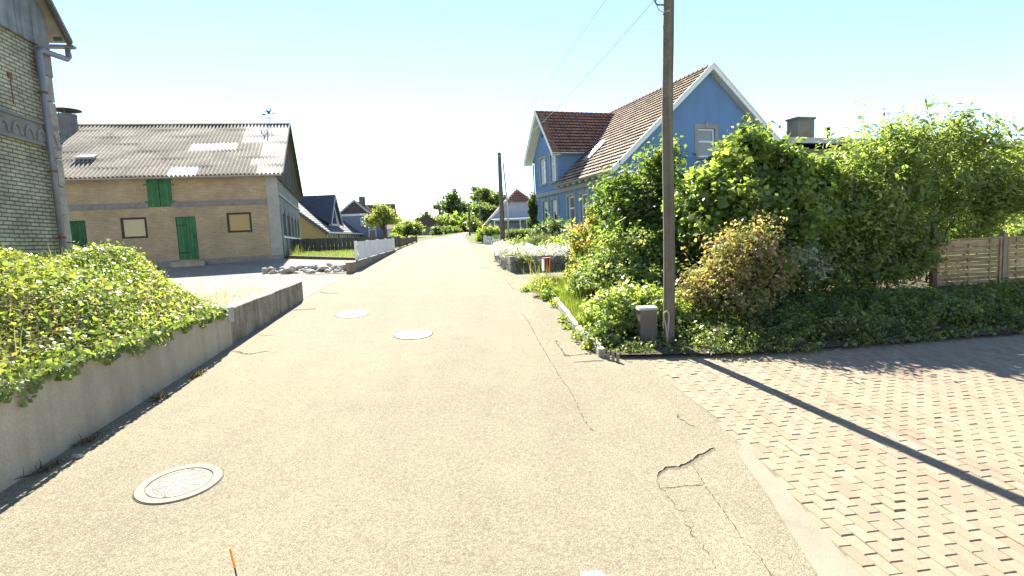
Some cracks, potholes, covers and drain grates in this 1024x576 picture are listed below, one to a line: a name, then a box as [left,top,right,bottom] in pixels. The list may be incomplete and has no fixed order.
crack [232,335,271,355]
crack [521,313,602,432]
crack [655,447,773,576]
manhole cover [132,463,224,505]
manhole cover [394,330,433,339]
